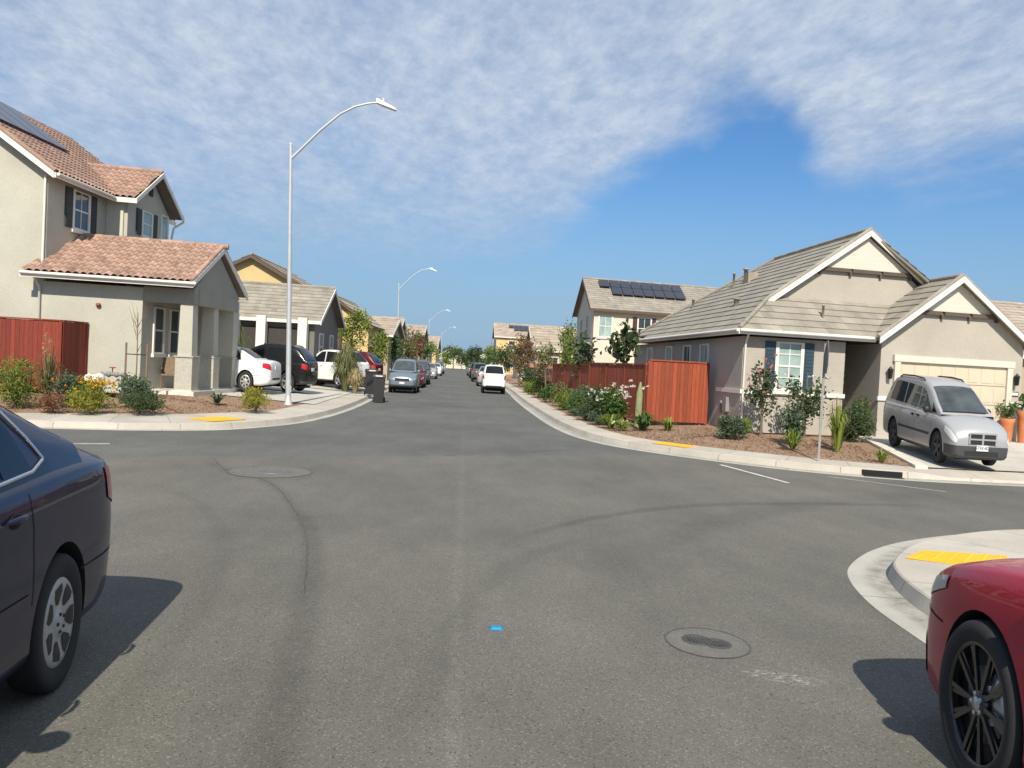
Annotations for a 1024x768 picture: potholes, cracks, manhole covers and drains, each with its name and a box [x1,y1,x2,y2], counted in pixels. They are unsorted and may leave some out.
crack [214,459,309,593]
manhole cover [664,627,751,658]
manhole cover [227,466,312,478]
drain grate [862,469,904,479]
